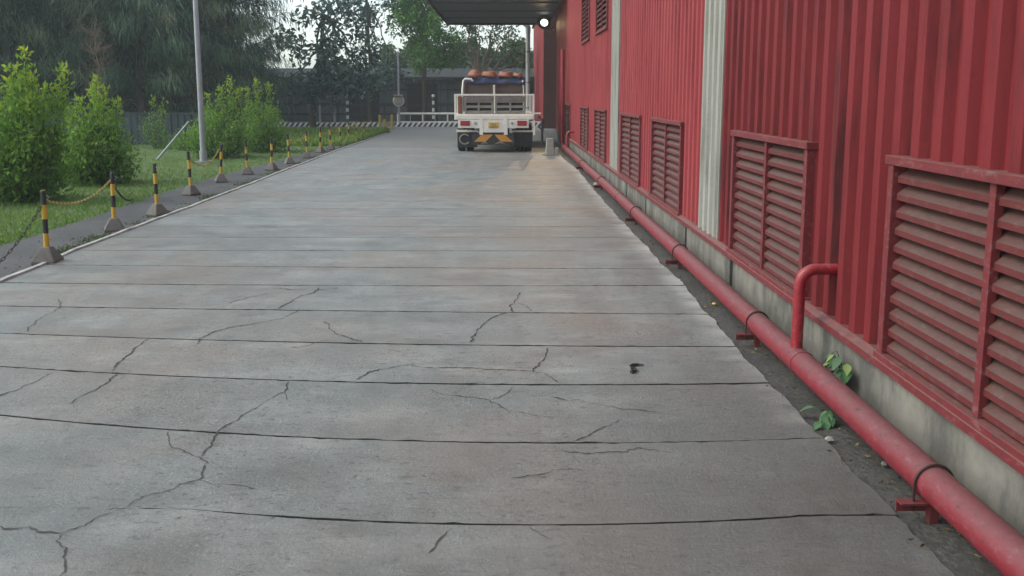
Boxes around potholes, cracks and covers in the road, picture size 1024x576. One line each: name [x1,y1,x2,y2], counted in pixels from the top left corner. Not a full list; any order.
crack [198,287,339,344]
crack [0,381,289,576]
crack [470,293,531,342]
crack [71,339,147,403]
crack [357,348,666,478]
